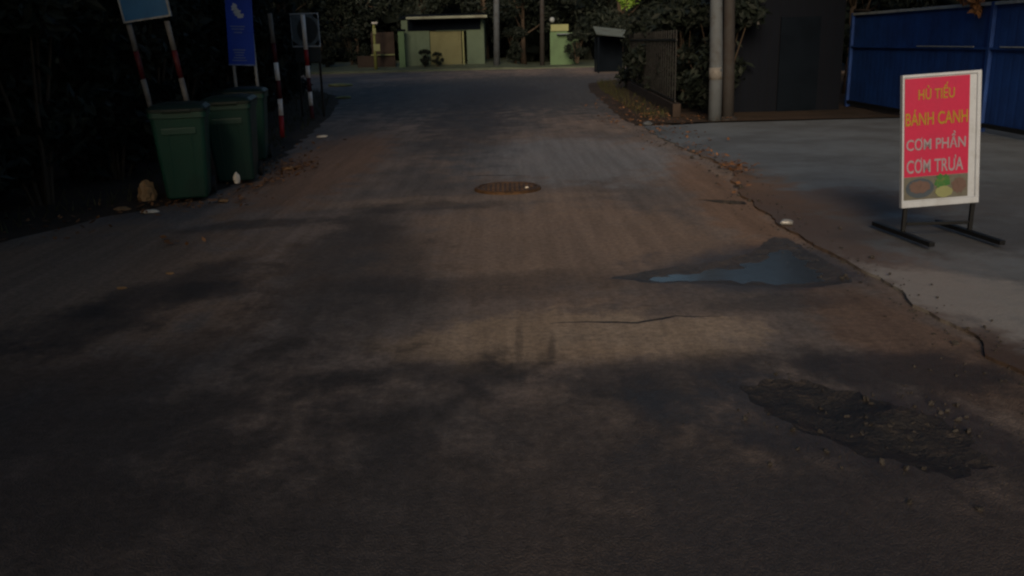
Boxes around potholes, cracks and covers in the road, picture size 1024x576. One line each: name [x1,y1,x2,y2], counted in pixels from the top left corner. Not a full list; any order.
pothole [611,237,853,287]
manhole cover [474,181,541,195]
crack [549,315,710,324]
pothole [739,379,997,479]
